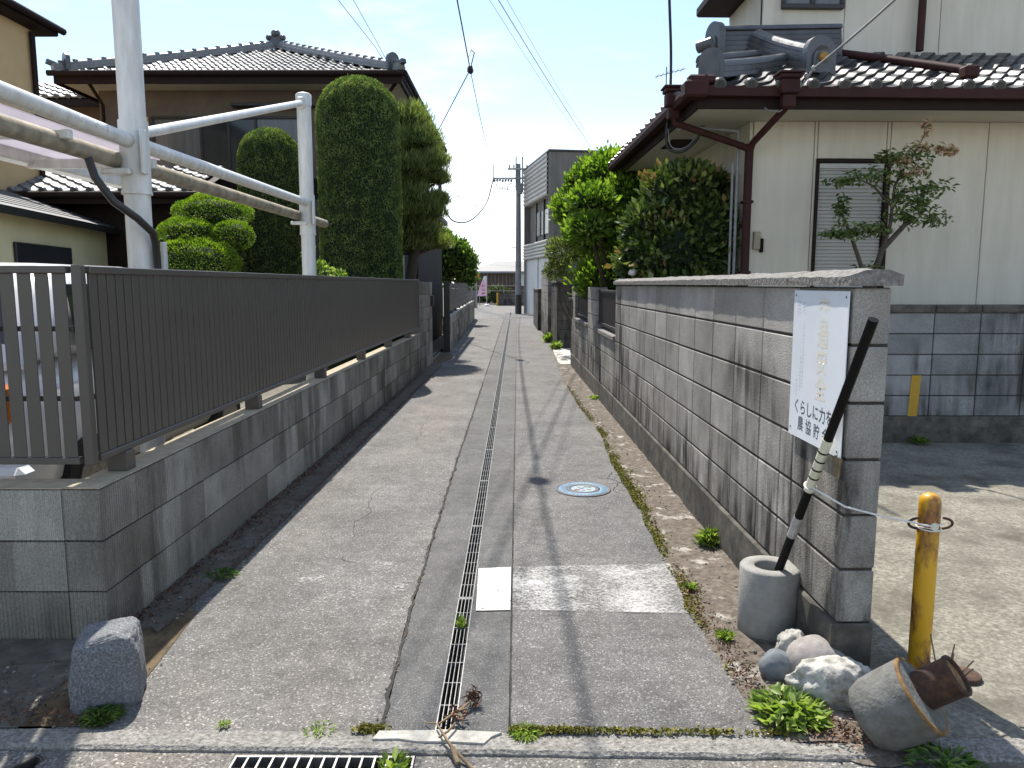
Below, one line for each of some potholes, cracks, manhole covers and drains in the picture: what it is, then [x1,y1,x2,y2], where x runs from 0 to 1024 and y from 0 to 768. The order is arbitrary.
drain grate [435,598,473,730]
manhole cover [555,482,611,497]
drain grate [459,526,483,603]
drain grate [486,427,496,452]
drain grate [472,481,489,530]
drain grate [480,450,493,484]
drain grate [228,755,416,768]
